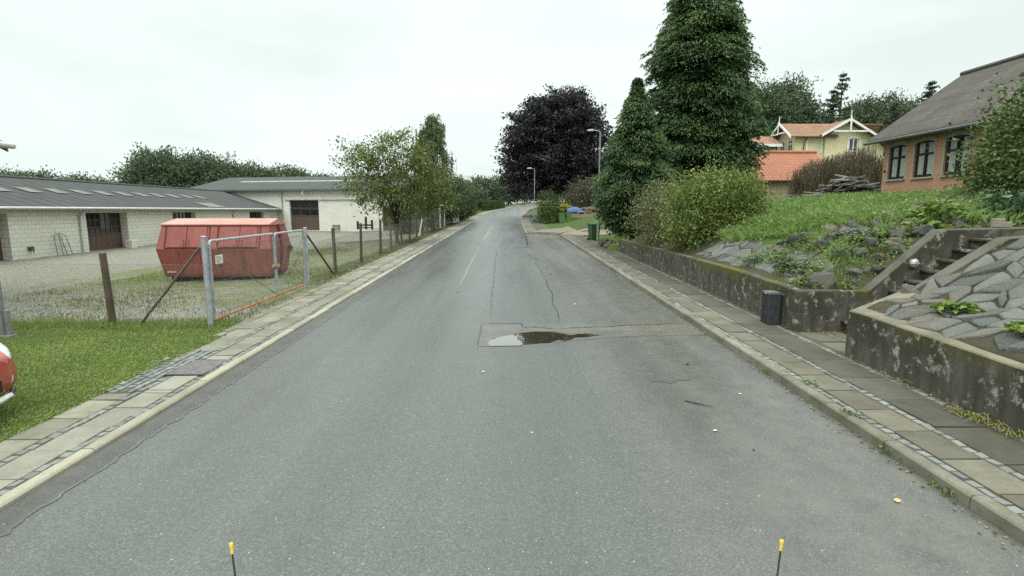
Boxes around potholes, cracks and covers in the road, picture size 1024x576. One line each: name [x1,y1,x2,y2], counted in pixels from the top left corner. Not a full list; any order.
crack [530,257,678,329]
